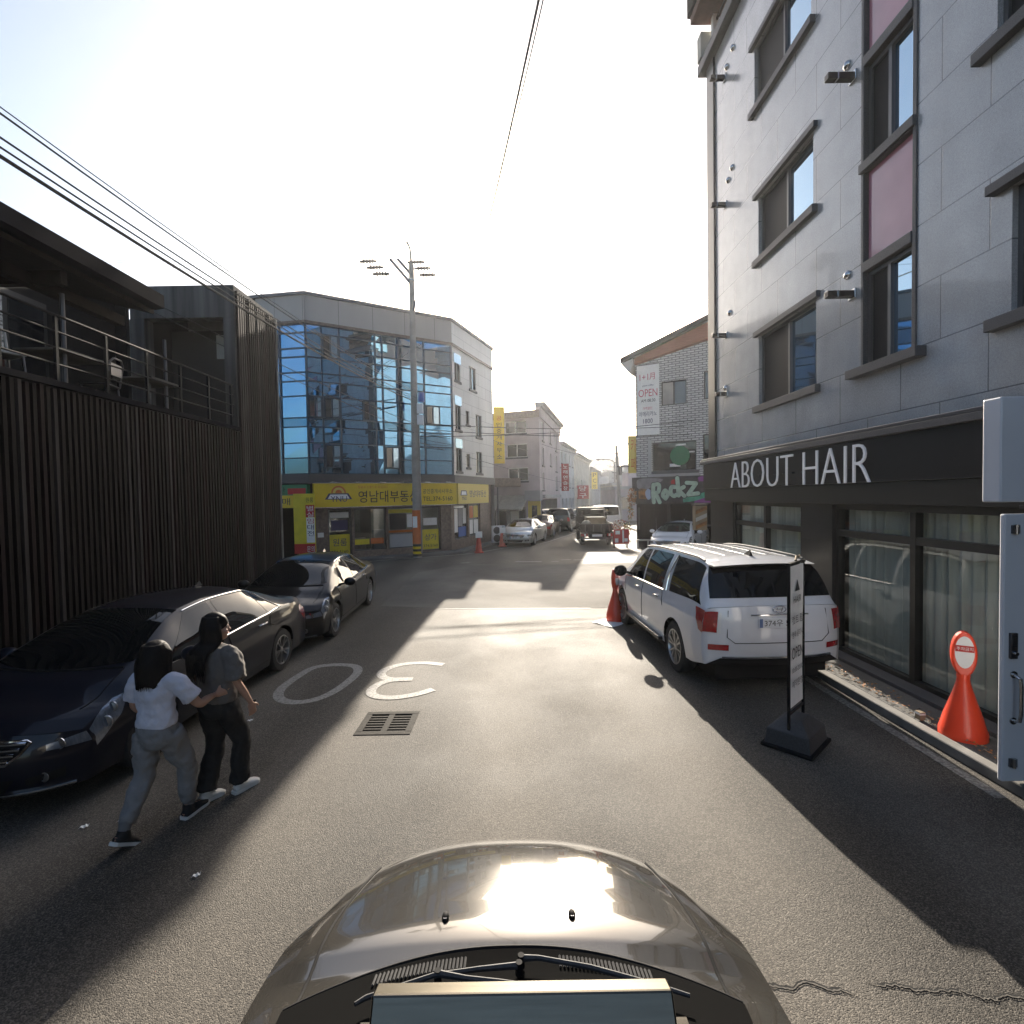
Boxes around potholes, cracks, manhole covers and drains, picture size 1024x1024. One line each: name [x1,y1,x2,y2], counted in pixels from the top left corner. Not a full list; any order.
drain grate [353,711,420,736]
crack [768,979,1024,1001]
